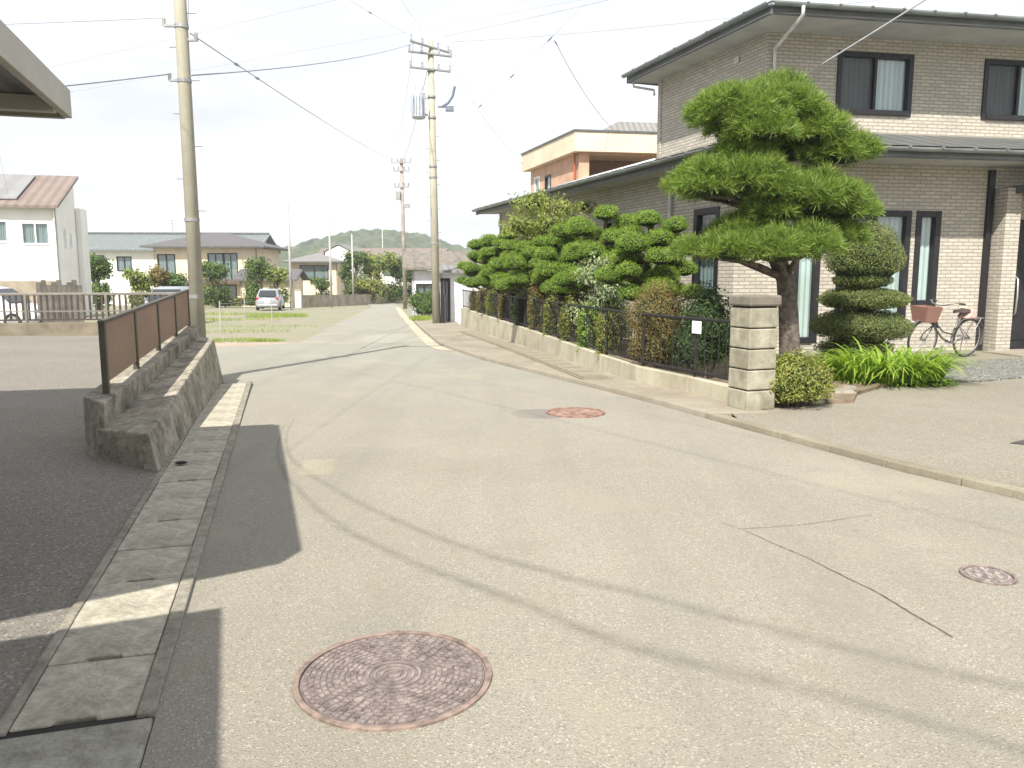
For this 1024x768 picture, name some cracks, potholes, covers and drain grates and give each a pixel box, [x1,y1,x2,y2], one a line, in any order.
manhole cover [292,631,492,732]
crack [721,514,954,637]
manhole cover [959,565,1018,586]
manhole cover [546,407,605,418]
